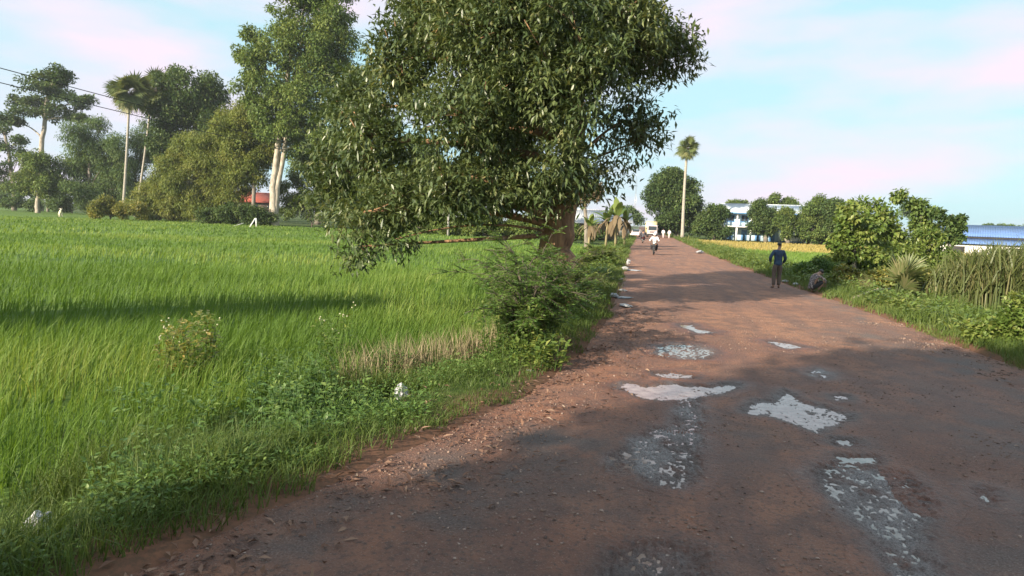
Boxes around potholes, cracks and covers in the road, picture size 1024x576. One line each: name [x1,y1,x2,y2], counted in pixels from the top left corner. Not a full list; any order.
pothole [754,338,818,351]
pothole [669,322,728,335]
pothole [640,368,712,381]
pothole [793,365,849,383]
pothole [811,433,882,451]
pothole [642,341,731,362]
pothole [580,420,728,501]
pothole [653,396,724,435]
pothole [725,385,876,435]
pothole [809,447,900,472]
pothole [599,377,758,404]
pothole [562,527,748,576]
